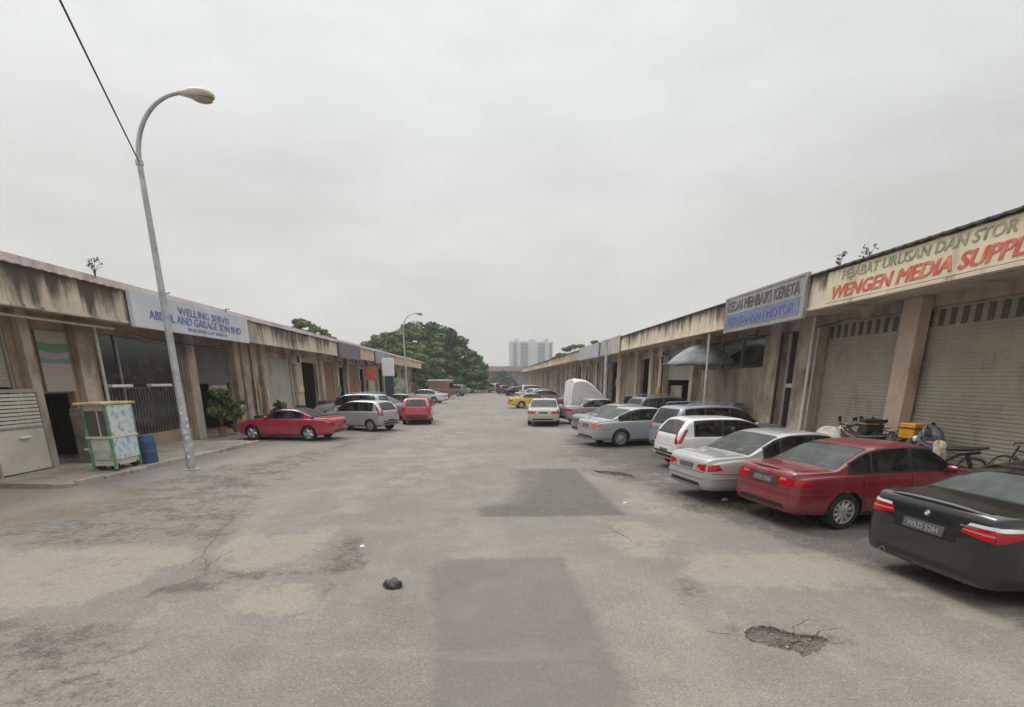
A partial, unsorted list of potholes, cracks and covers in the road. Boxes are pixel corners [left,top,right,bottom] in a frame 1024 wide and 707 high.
crack [145,502,251,597]
pothole [744,625,828,657]
pothole [593,470,636,478]
